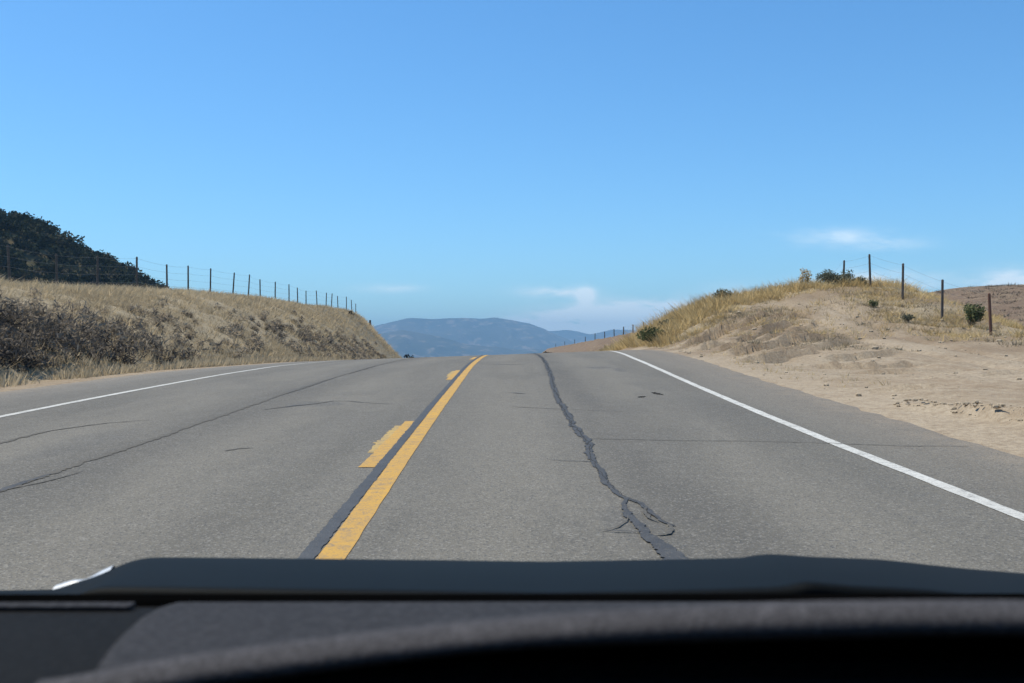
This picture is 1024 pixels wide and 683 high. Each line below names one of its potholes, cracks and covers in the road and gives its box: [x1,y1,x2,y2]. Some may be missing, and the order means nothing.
crack [0,357,419,492]
